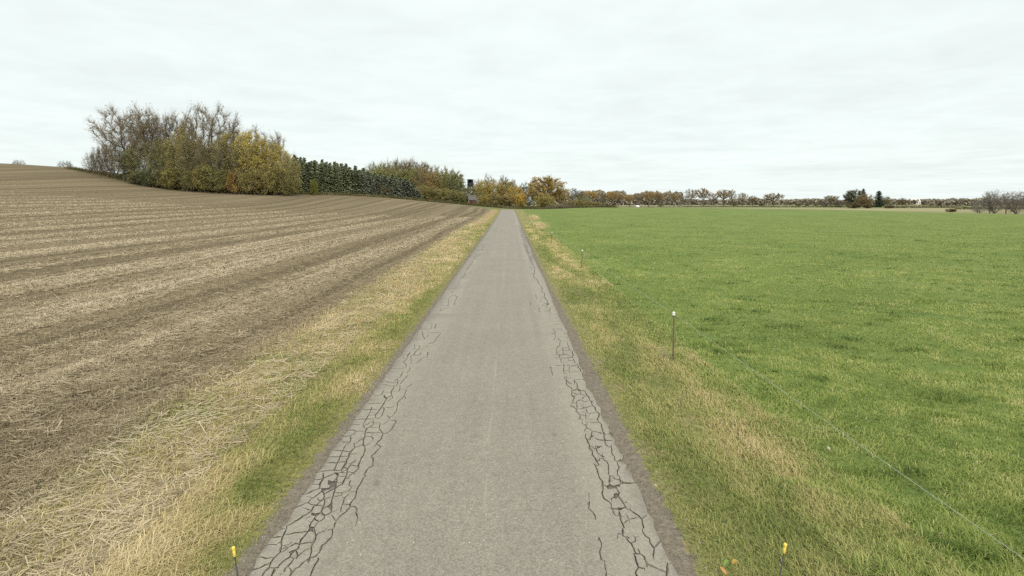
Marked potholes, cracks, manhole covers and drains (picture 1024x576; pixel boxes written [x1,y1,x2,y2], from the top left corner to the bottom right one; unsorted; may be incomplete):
crack [254,323,441,576]
crack [523,244,669,576]
